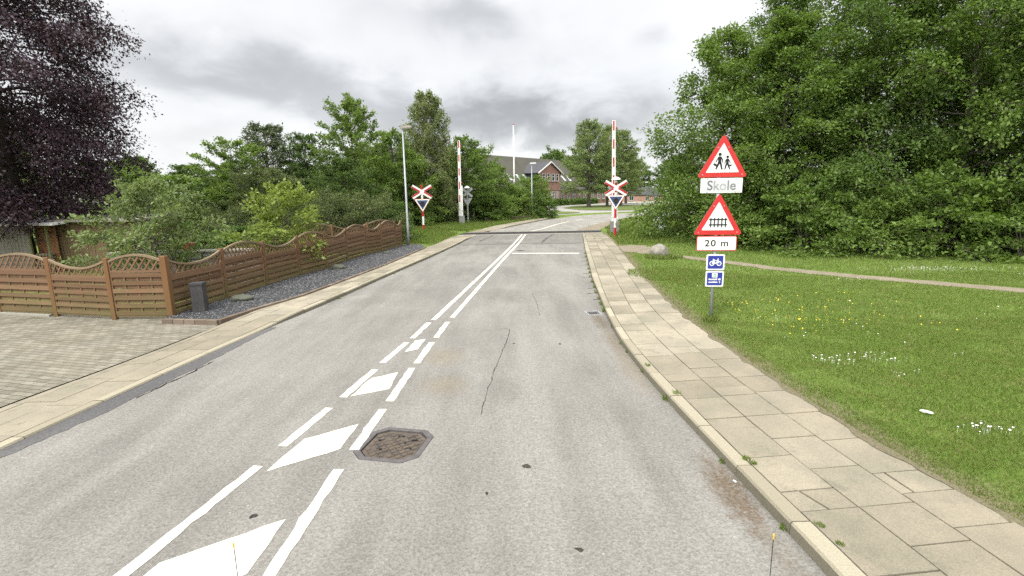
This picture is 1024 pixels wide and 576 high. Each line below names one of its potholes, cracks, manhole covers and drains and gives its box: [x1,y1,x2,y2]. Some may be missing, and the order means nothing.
crack [481,328,510,414]
manhole cover [353,427,433,463]
